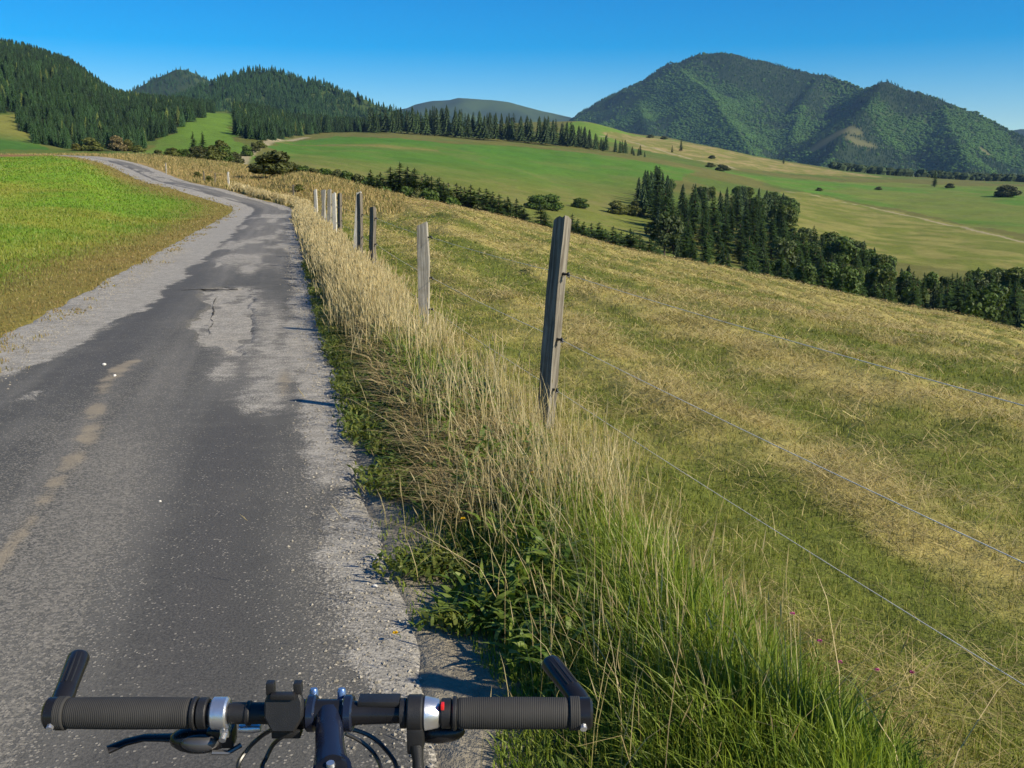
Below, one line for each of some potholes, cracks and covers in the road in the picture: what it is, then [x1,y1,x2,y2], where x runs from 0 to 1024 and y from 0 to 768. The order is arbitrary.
crack [191,289,238,332]
